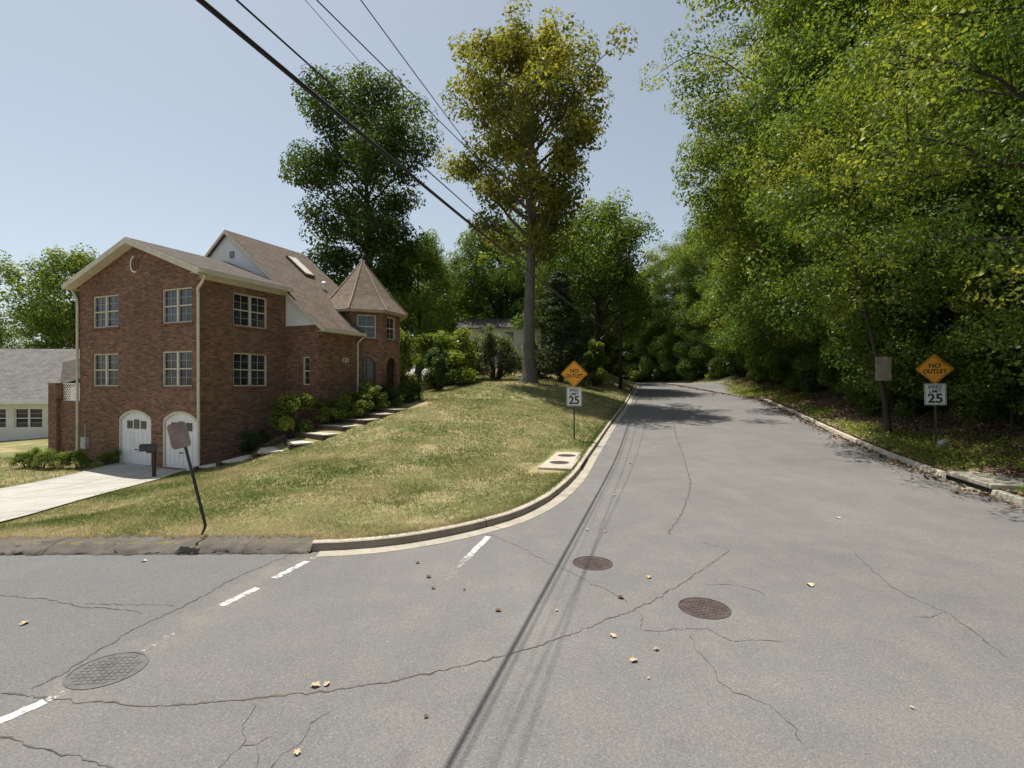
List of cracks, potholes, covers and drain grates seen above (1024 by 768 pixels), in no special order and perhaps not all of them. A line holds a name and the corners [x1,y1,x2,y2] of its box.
crack [668,414,692,534]
crack [853,550,1005,656]
manhole cover [678,597,731,620]
manhole cover [573,556,613,570]
crack [7,534,802,768]
manhole cover [62,651,149,690]
drain grate [538,452,588,471]
